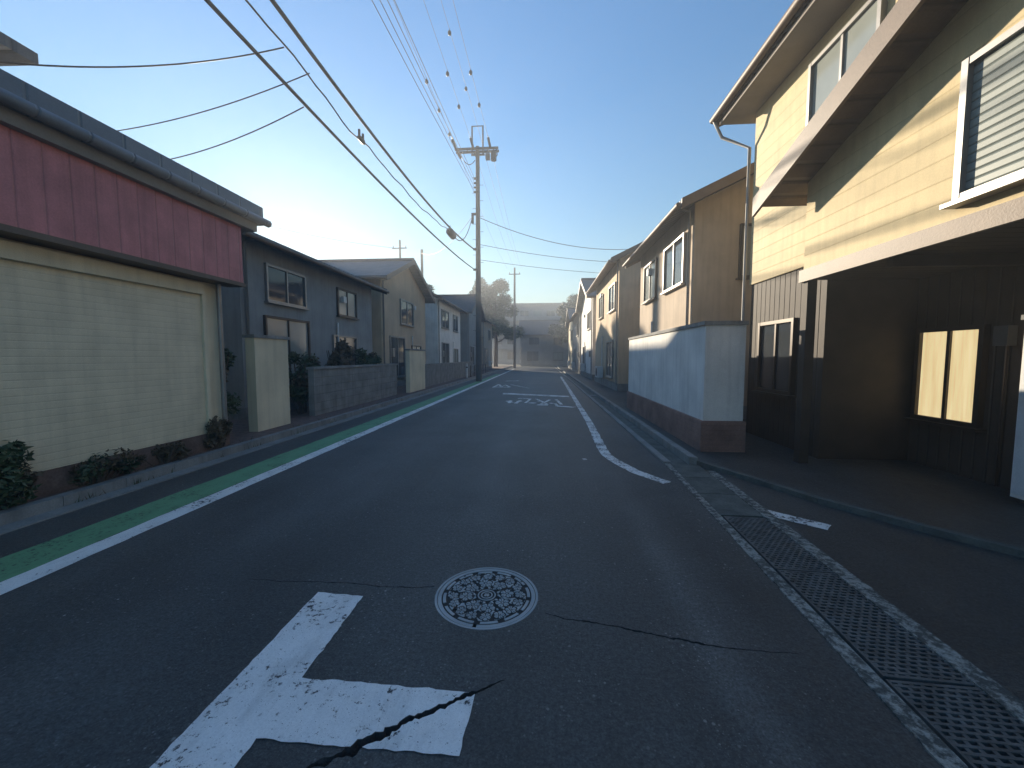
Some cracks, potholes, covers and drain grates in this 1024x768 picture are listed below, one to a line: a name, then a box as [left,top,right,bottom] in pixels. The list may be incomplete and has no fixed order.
crack [253,579,434,588]
drain grate [885,679,1024,768]
crack [306,680,504,768]
crack [546,613,798,654]
manhole cover [435,567,538,630]
drain grate [777,570,975,687]
drain grate [723,516,834,573]
